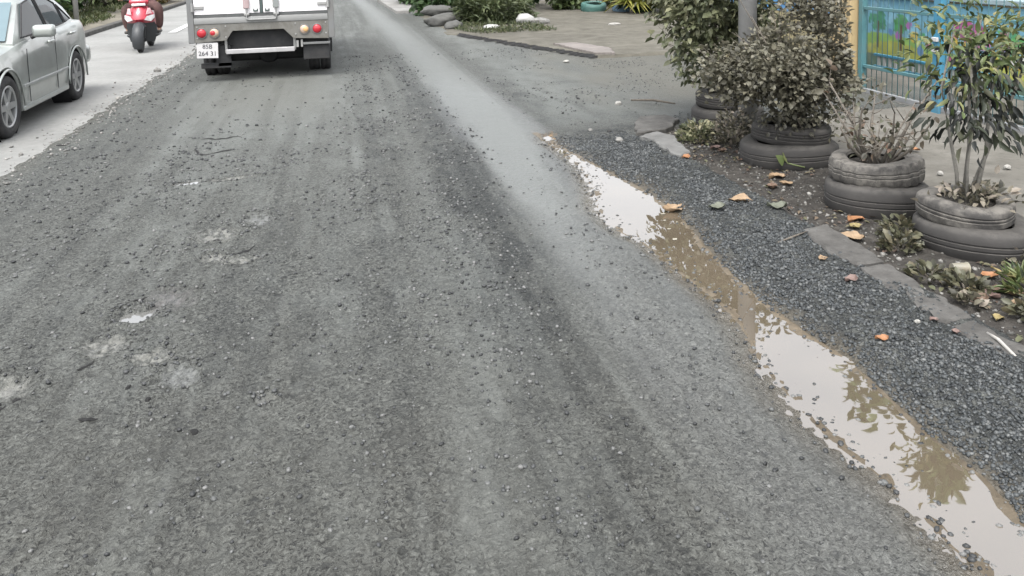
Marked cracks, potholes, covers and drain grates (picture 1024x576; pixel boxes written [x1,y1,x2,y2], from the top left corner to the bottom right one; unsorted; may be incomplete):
pothole [128,346,176,367]
pothole [75,333,133,360]
pothole [158,360,203,391]
pothole [188,226,243,244]
pothole [239,211,276,226]
crack [194,136,240,155]
pothole [0,372,34,403]
pothole [217,254,262,265]
pothole [198,251,236,265]
pothole [114,303,157,323]
